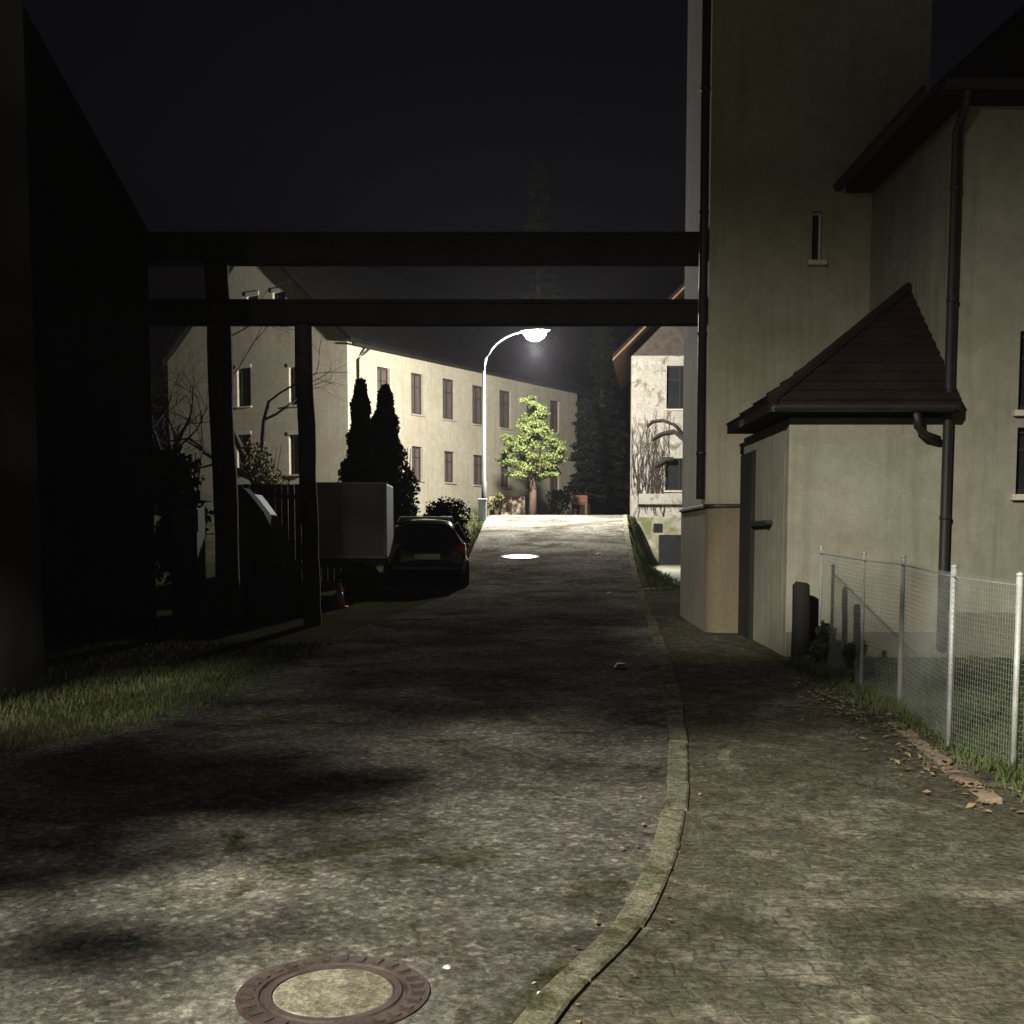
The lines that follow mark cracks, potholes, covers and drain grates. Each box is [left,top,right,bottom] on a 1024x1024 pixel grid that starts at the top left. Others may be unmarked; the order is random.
manhole cover [235,955,430,1024]
